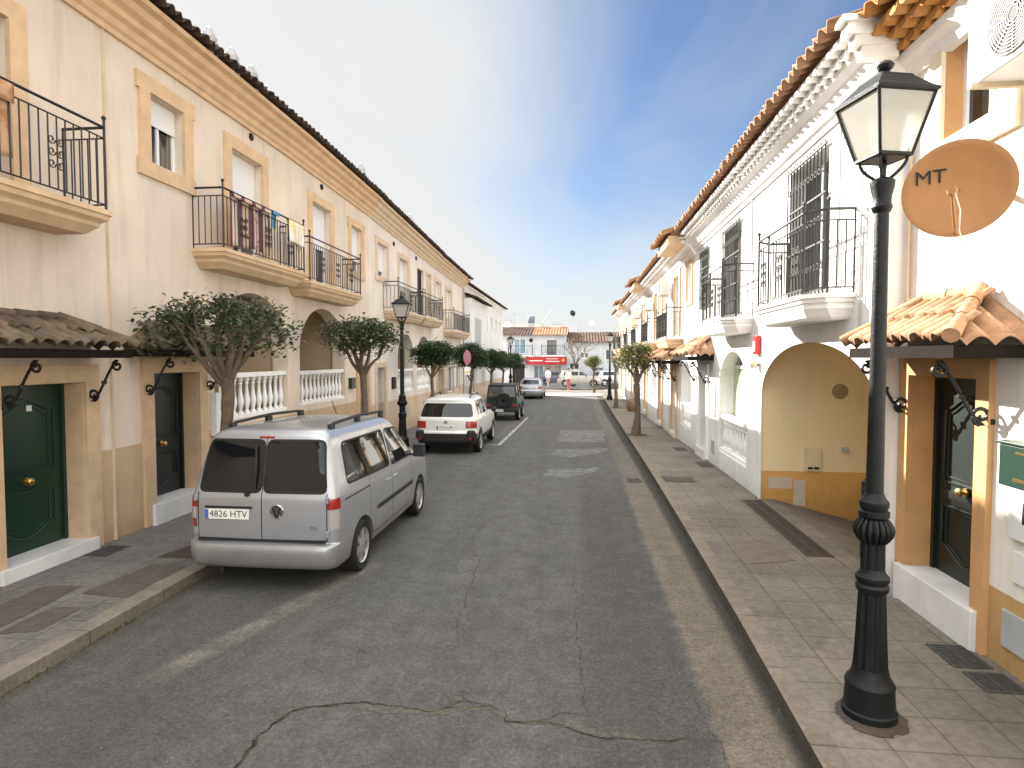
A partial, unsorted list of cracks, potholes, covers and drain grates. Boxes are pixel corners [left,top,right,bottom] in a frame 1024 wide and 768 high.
crack [456,518,524,640]
crack [233,683,729,768]
drain grate [742,500,835,558]
